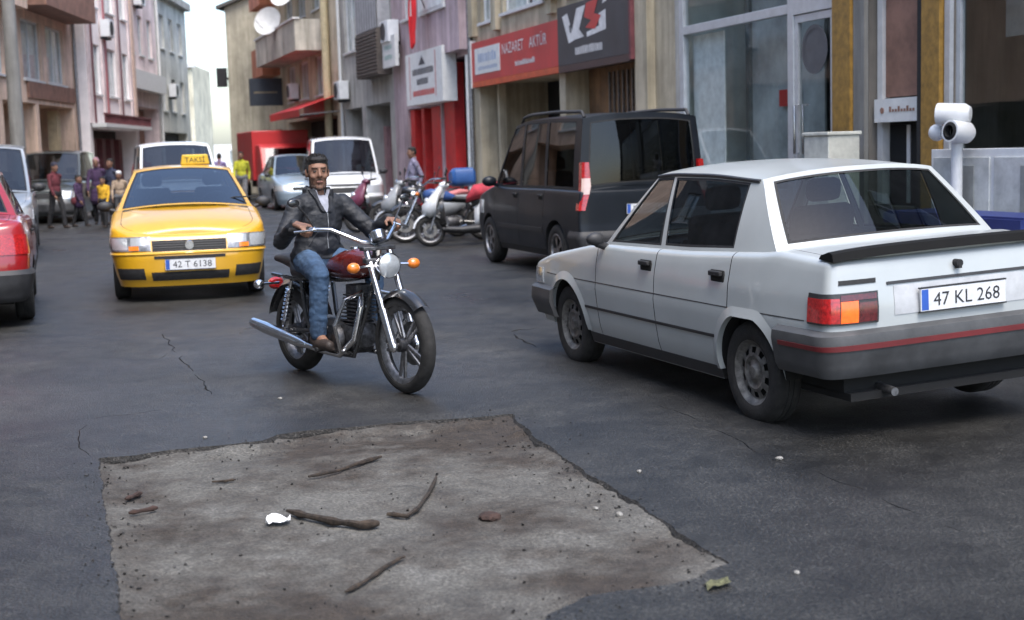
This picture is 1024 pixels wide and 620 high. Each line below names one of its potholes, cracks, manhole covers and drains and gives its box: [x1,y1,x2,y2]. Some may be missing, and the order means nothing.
crack [160,334,212,394]
pothole [98,414,729,620]
